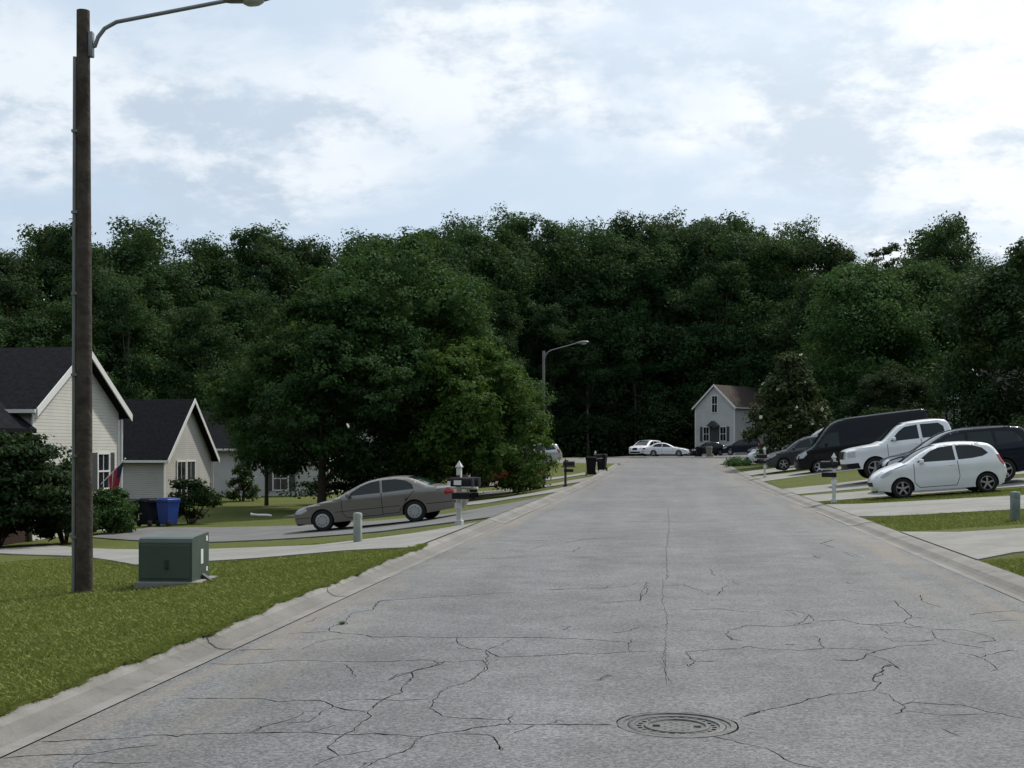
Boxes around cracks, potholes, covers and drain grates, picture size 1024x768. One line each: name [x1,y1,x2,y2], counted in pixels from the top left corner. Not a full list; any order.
manhole cover [617,712,739,741]
crack [716,737,819,768]
crack [684,569,1019,737]
crack [8,512,669,768]
